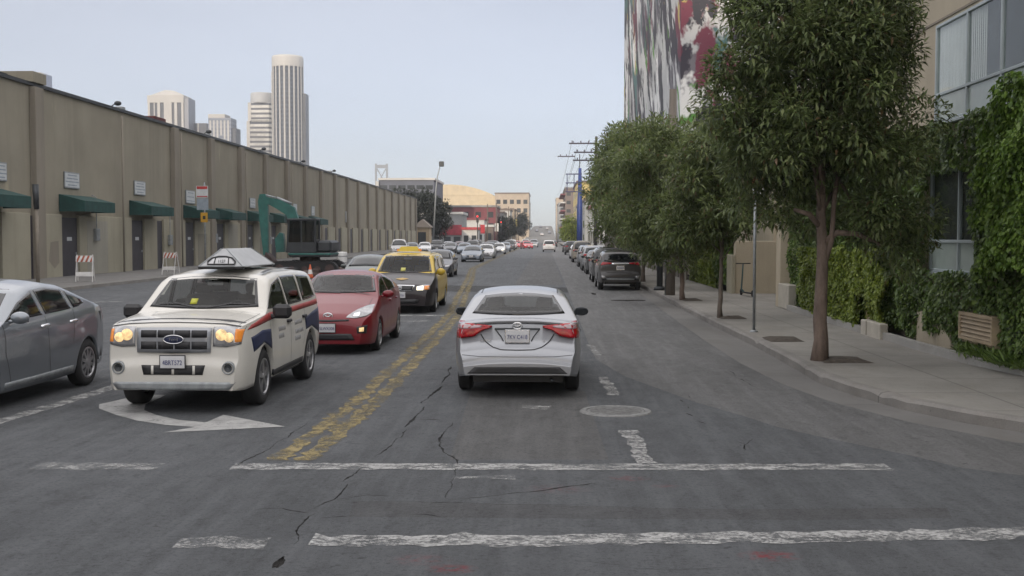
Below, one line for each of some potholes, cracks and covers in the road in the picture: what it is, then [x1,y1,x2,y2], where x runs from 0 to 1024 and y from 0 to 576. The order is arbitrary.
manhole cover [580,405,652,417]
crack [256,367,611,542]
